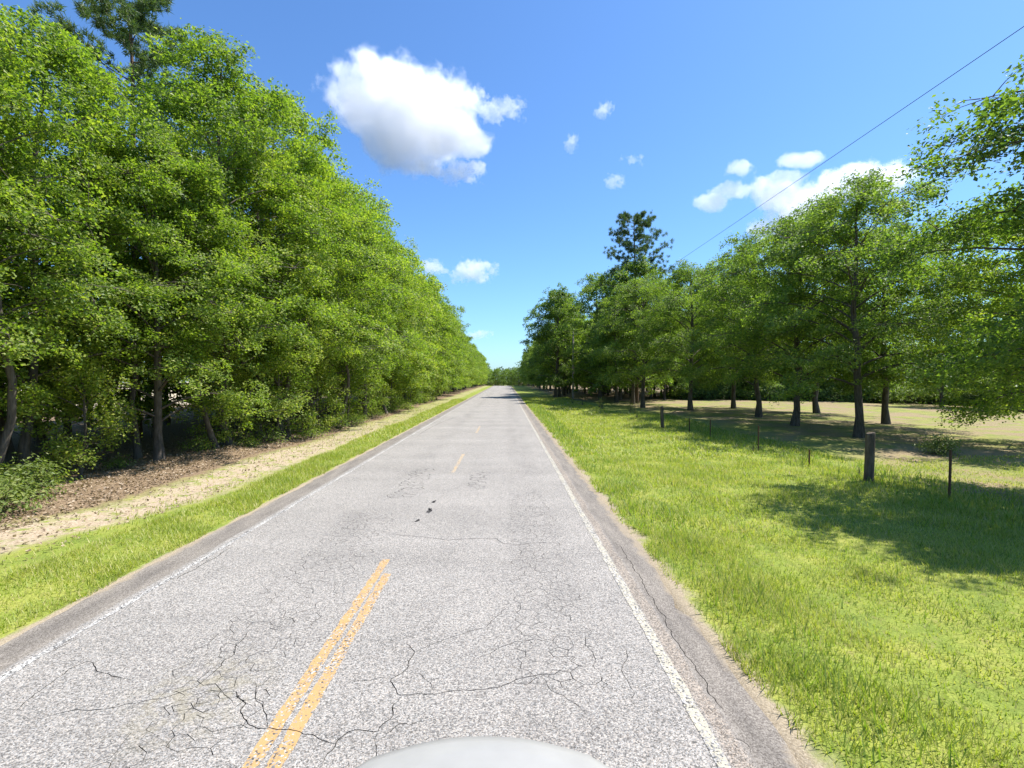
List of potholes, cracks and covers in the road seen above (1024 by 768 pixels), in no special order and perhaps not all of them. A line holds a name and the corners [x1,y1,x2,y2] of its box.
crack [12,637,130,714]
crack [40,493,608,768]
crack [621,547,723,709]
